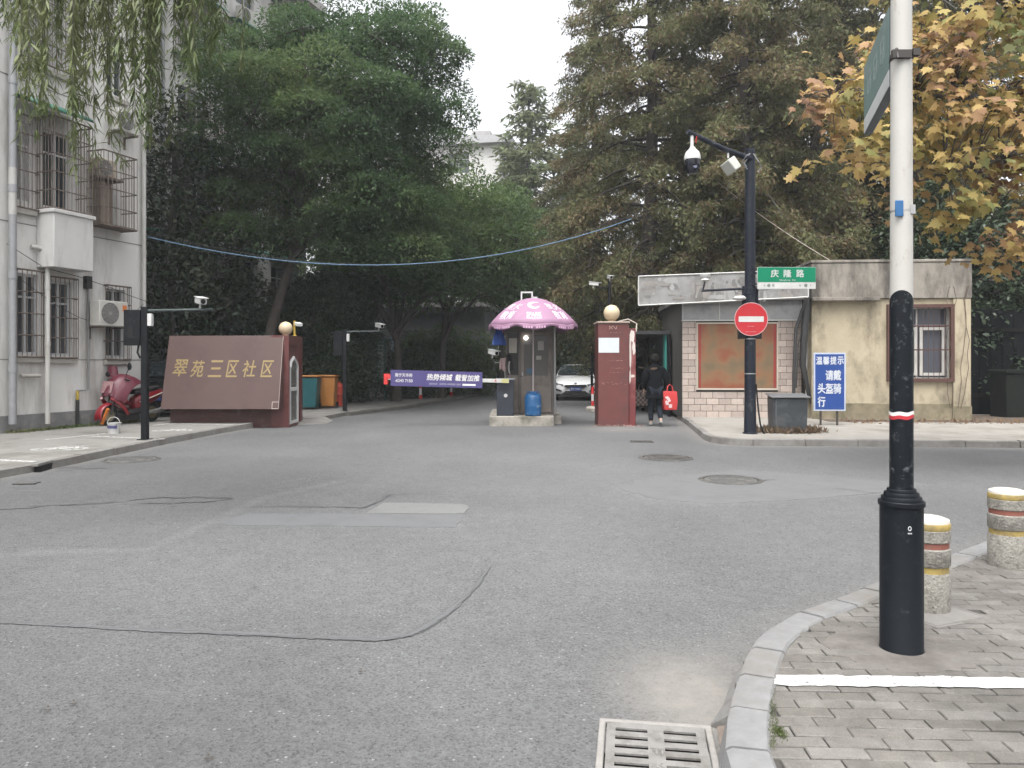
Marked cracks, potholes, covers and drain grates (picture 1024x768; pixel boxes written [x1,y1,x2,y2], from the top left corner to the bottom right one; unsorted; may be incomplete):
drain grate [595,718,719,768]
manhole cover [698,475,764,485]
